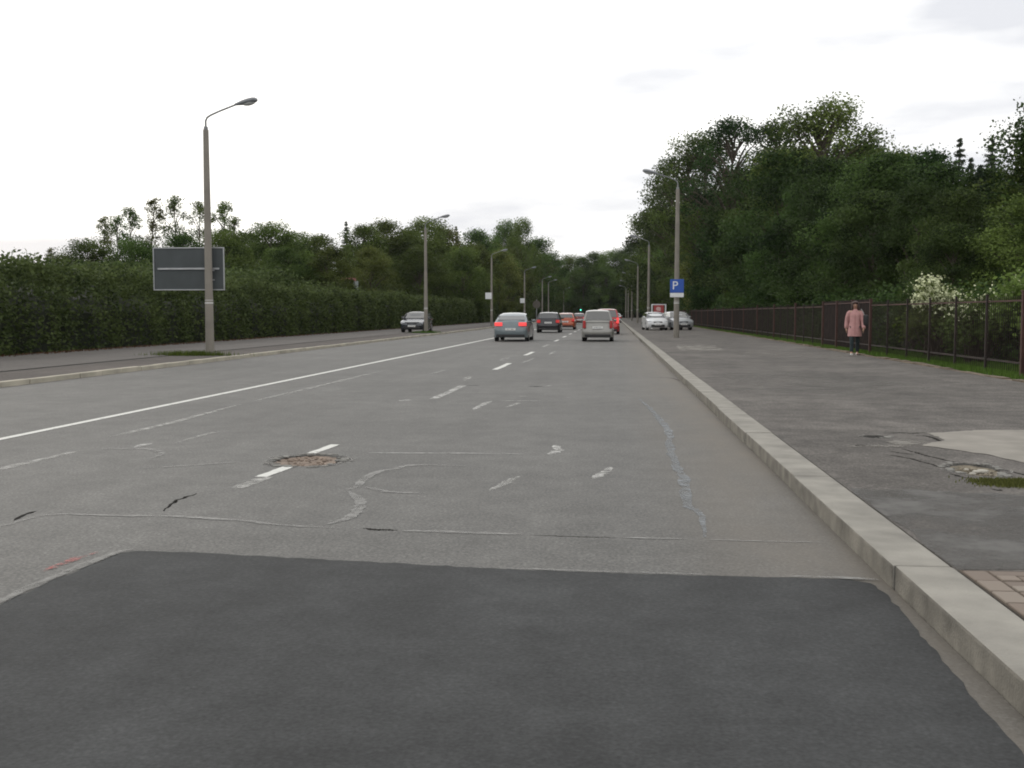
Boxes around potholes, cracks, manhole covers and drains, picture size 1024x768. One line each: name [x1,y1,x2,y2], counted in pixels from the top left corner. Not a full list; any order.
crack [163,493,197,511]
pothole [263,452,355,468]
crack [885,432,1024,491]
pothole [937,461,1014,478]
